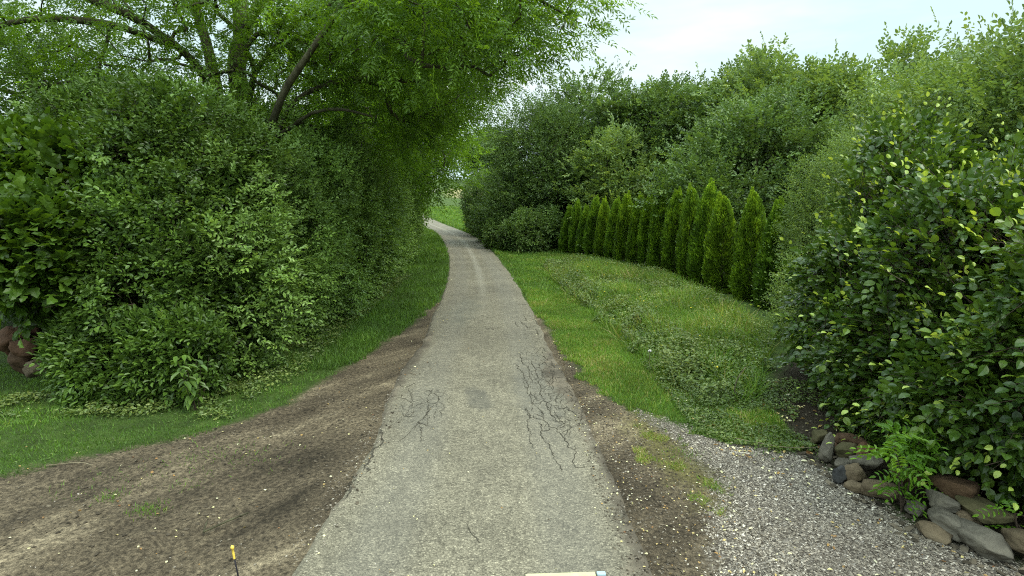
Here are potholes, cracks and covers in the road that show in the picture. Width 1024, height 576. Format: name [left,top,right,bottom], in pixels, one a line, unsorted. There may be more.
crack [517,347,585,469]
crack [396,383,451,441]
